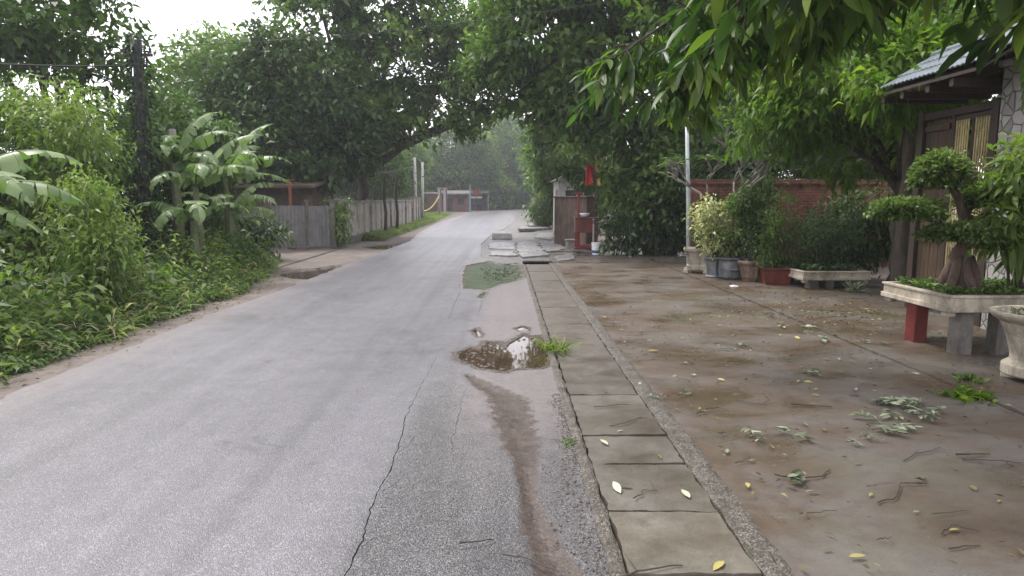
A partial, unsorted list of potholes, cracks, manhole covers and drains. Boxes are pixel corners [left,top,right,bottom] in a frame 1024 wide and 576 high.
pothole [462,261,524,290]
crack [344,358,436,576]
pothole [458,335,548,371]
